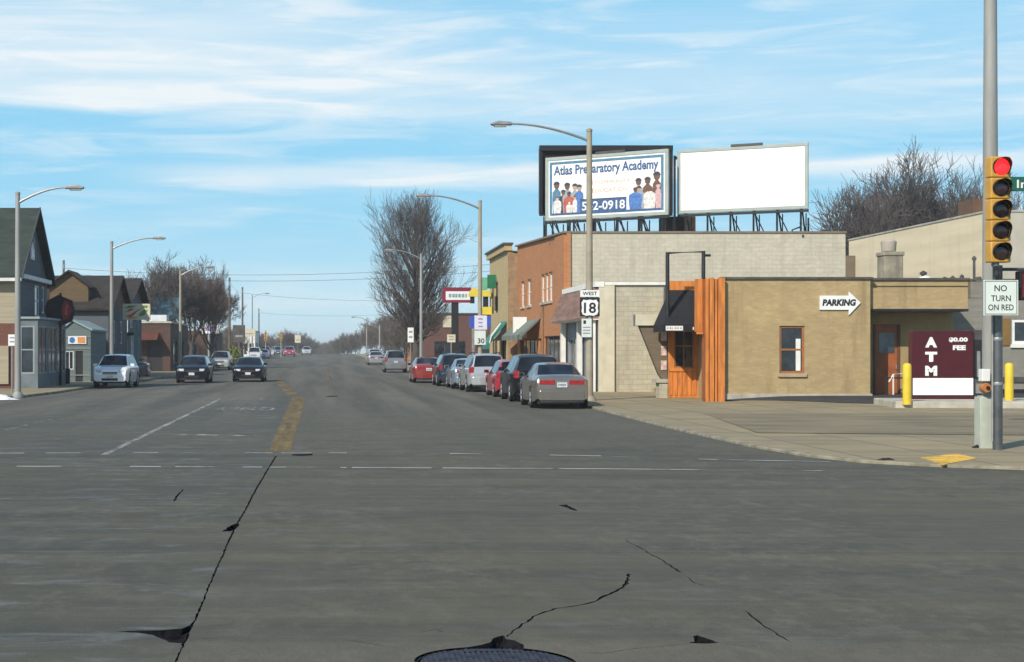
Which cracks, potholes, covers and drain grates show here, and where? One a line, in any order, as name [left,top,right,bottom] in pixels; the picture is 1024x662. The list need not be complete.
pothole [690,635,719,644]
crack [608,611,790,653]
crack [175,456,277,662]
pothole [118,625,192,646]
crack [626,540,702,585]
crack [507,573,631,637]
manhole cover [415,649,573,662]
